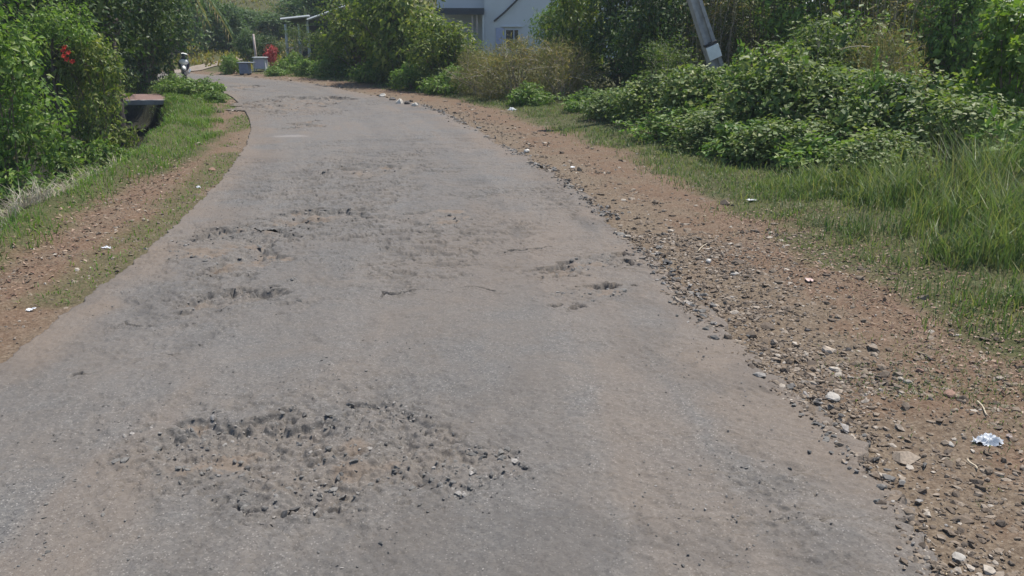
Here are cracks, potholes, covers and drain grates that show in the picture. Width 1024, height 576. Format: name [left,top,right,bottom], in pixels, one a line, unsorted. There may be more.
pothole [95,399,543,527]
pothole [150,277,302,327]
pothole [539,280,643,315]
pothole [522,251,645,283]
crack [369,284,510,304]
pothole [246,205,385,231]
